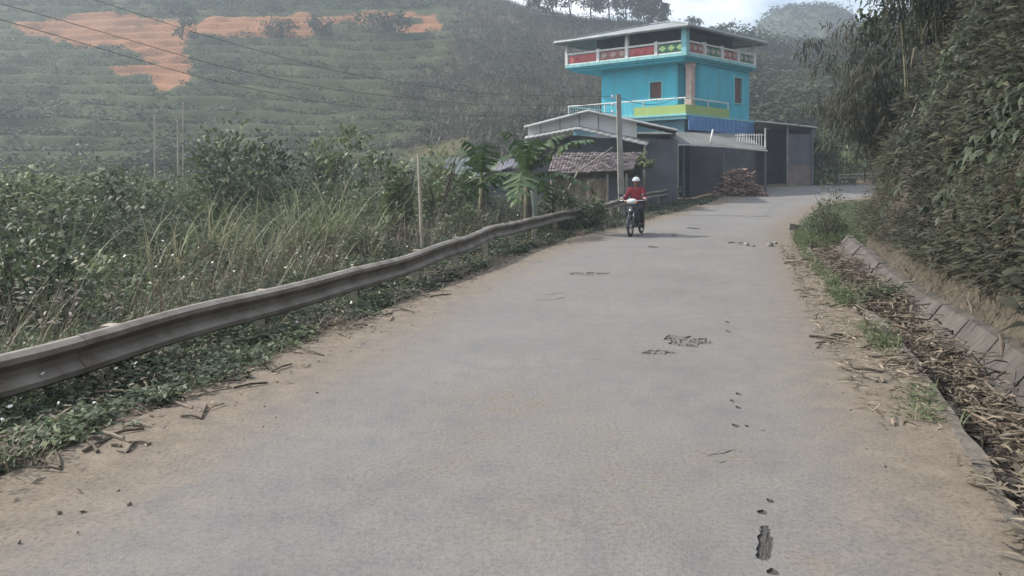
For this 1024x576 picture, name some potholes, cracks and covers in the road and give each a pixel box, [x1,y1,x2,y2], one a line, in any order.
pothole [755,525,773,561]
pothole [663,335,715,347]
